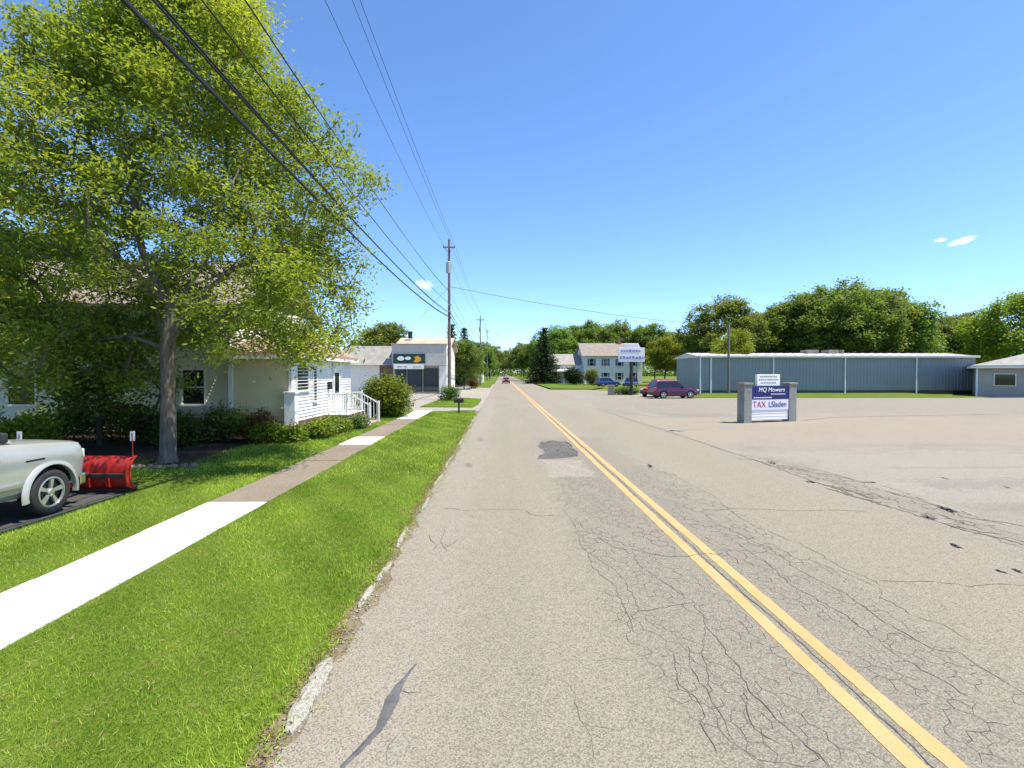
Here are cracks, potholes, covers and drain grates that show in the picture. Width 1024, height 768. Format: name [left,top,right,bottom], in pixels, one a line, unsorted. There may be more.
crack [443,461,889,767]
crack [603,410,1024,548]
